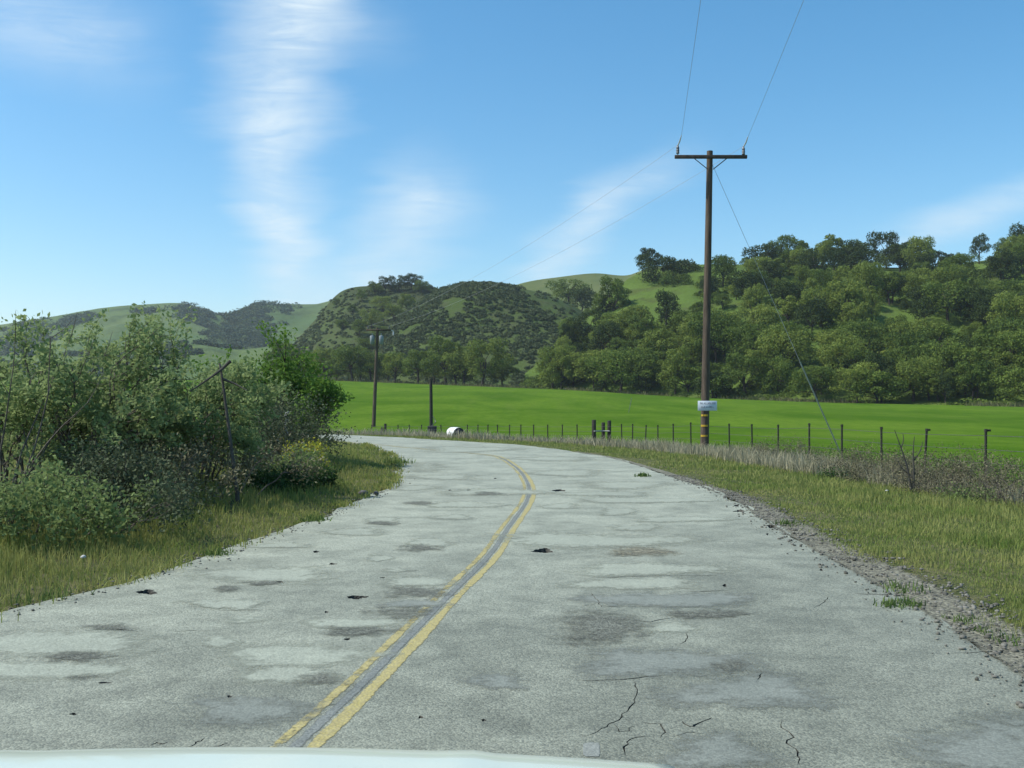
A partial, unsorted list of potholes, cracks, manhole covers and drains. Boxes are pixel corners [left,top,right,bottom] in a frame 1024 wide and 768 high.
crack [582,675,712,753]
crack [781,722,801,766]
